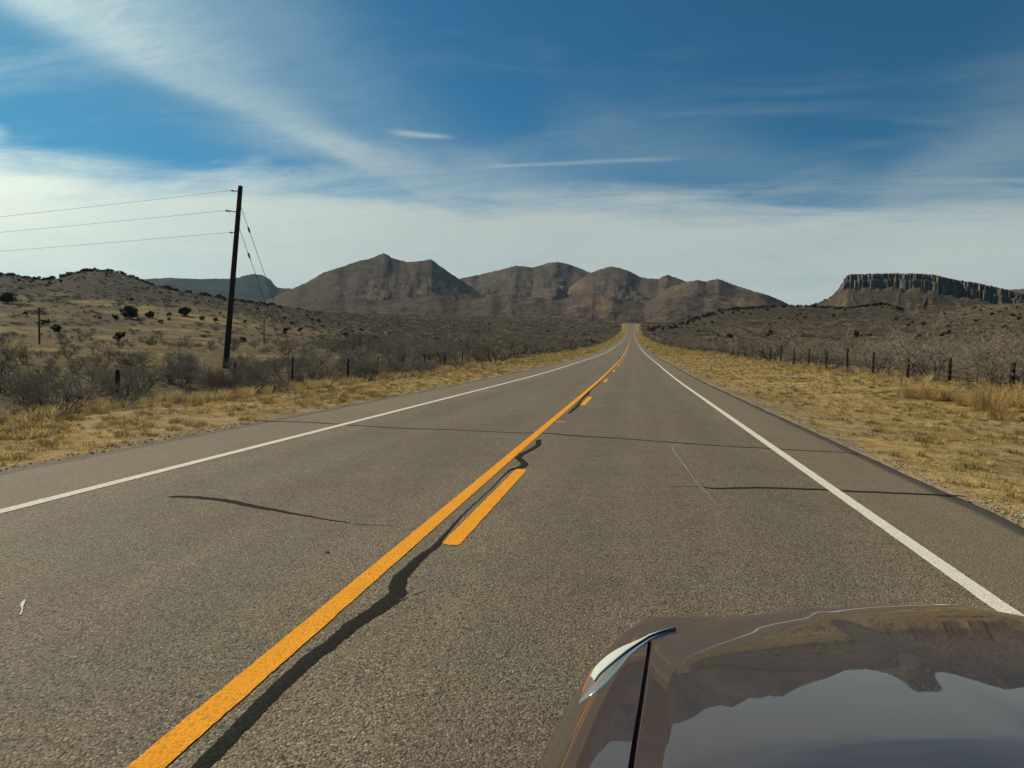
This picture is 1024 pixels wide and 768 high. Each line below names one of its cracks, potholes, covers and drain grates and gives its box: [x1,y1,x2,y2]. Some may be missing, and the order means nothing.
crack [664,446,966,506]
